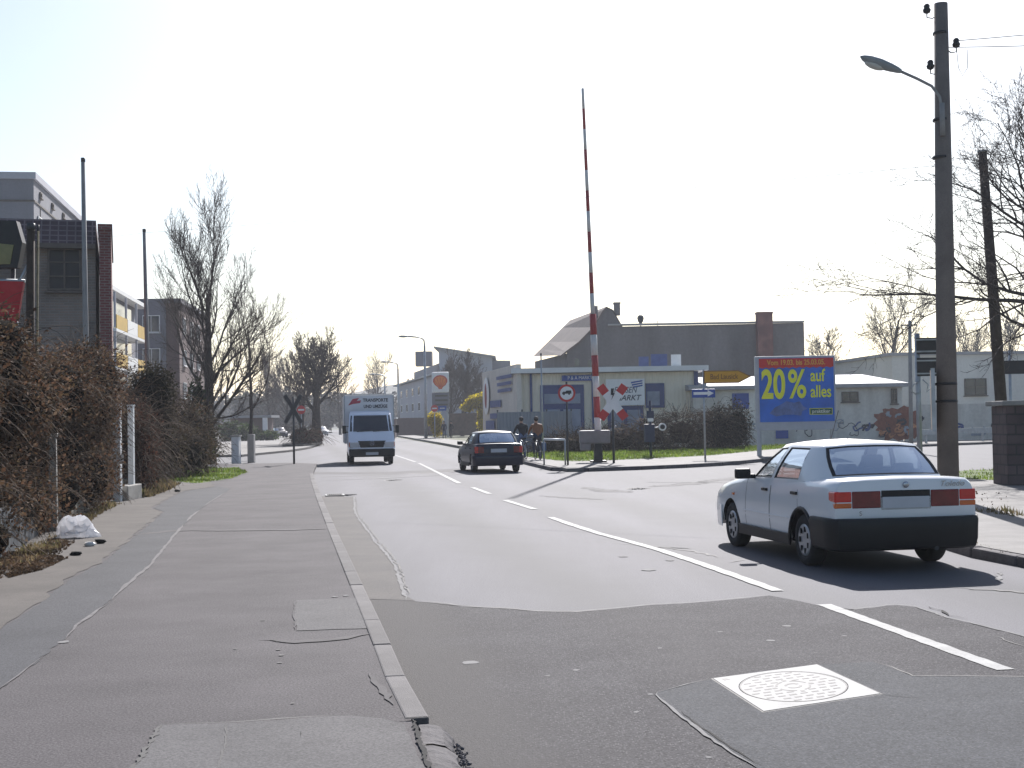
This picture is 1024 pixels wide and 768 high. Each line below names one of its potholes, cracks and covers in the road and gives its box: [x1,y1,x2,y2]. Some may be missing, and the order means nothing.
manhole cover [711,664,882,712]
